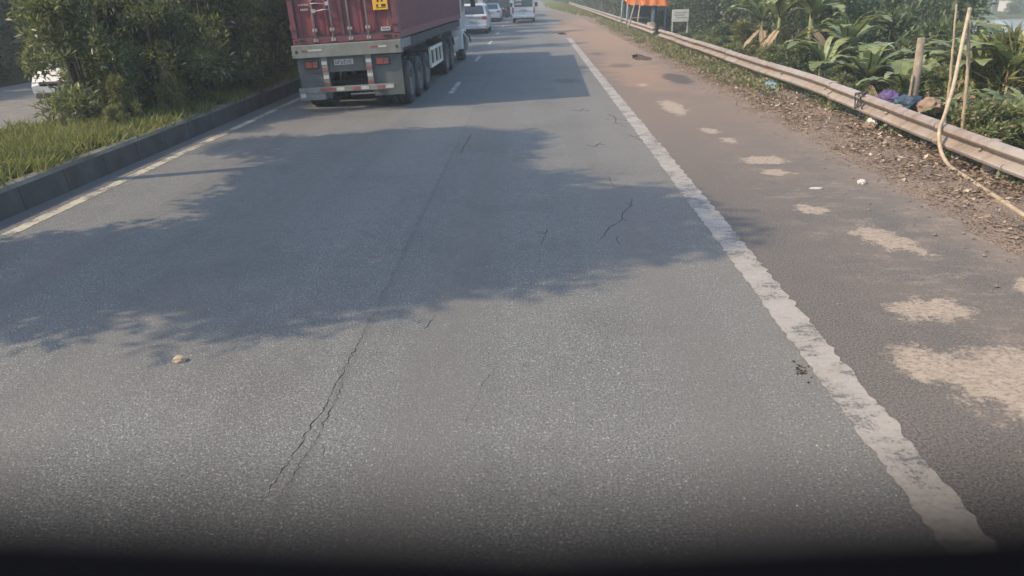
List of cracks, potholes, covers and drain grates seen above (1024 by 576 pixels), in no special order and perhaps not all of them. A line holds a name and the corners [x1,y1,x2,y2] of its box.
crack [265,322,368,500]
